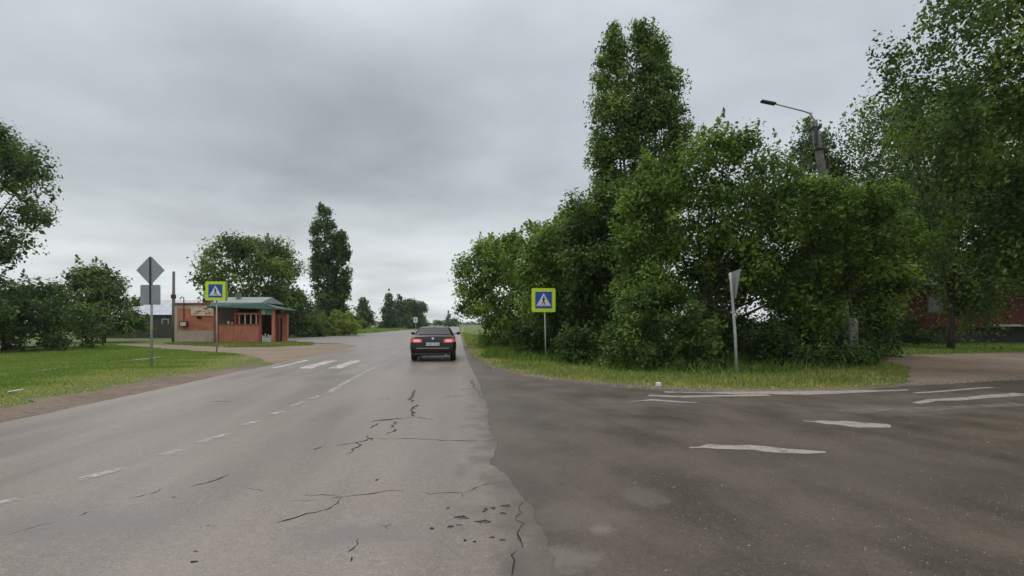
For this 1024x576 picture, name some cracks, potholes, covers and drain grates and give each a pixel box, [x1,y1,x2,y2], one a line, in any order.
crack [278,490,400,523]
crack [511,502,525,575]
crack [314,391,488,454]
